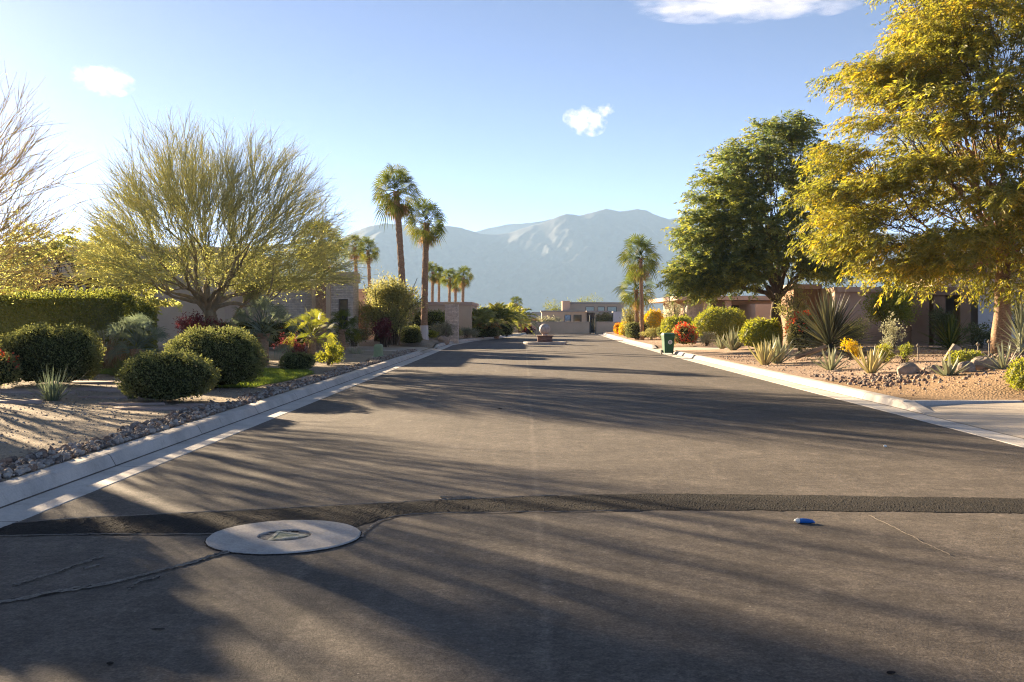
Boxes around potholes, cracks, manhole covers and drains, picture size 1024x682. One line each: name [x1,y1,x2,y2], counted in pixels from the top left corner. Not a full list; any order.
crack [0,494,640,537]
crack [869,515,950,555]
crack [12,555,104,585]
manhole cover [204,520,362,556]
